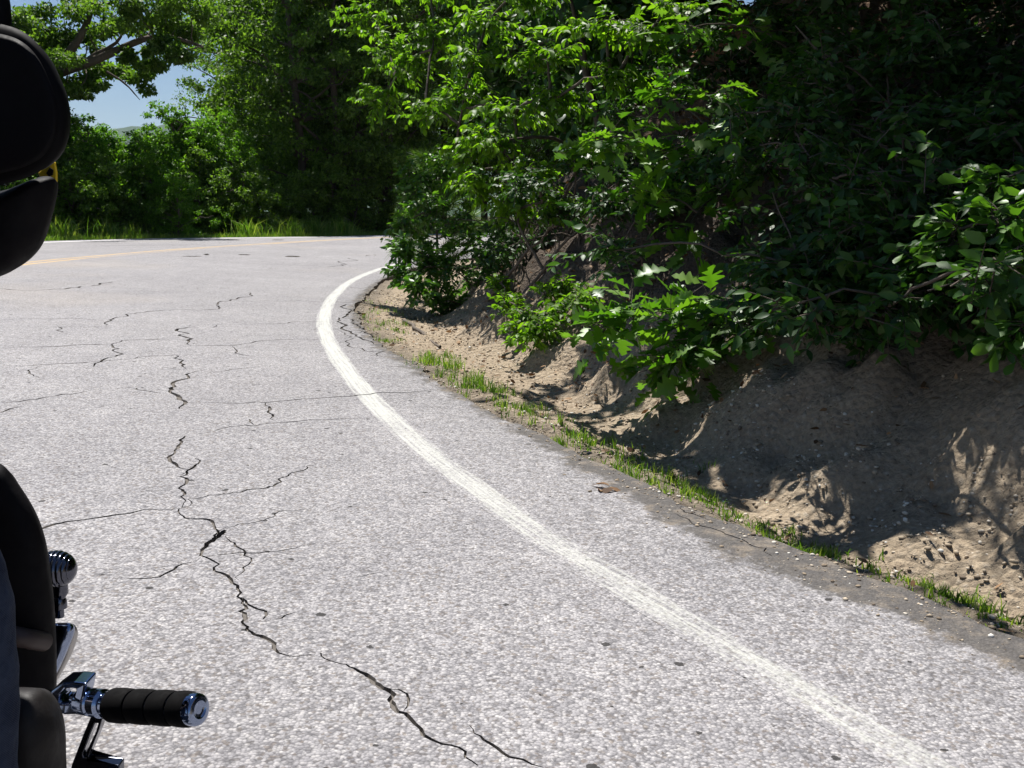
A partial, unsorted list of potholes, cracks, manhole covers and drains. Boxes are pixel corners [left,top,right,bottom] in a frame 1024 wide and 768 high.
crack [4,293,433,434]
crack [675,506,772,556]
crack [321,656,542,767]
crack [42,436,317,657]
